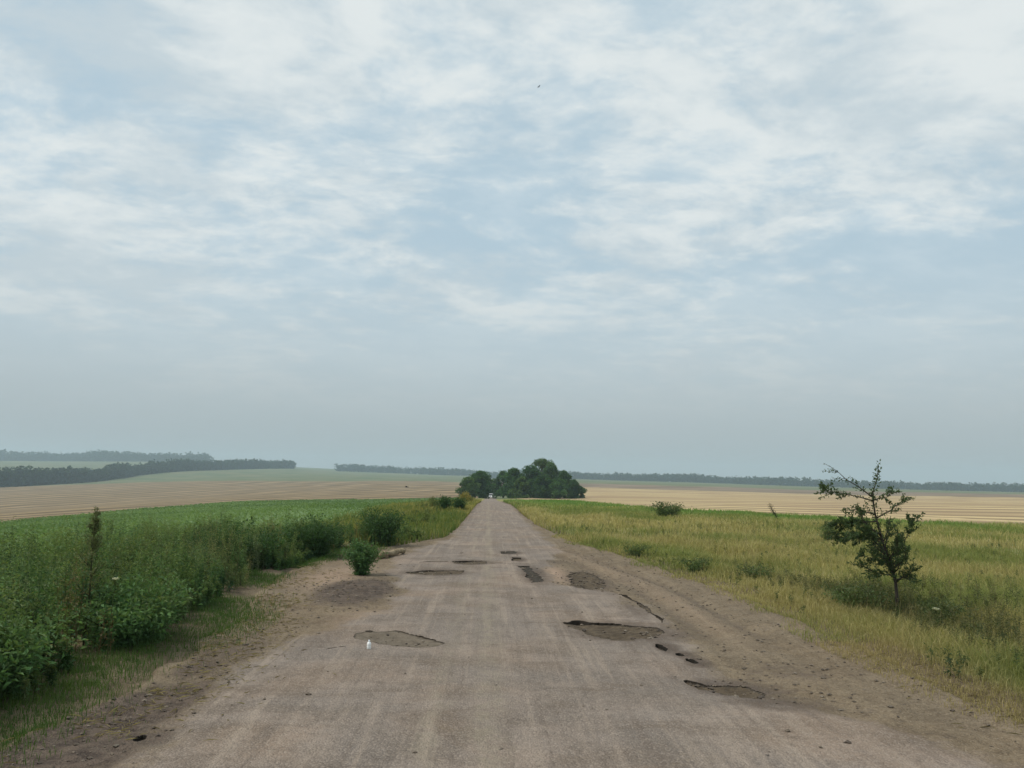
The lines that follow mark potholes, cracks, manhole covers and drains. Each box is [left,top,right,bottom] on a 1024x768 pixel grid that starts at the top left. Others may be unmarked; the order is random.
pothole [563,620,665,641]
crack [619,594,664,623]
pothole [354,631,444,648]
pothole [518,566,544,583]
pothole [566,572,606,590]
pothole [684,680,765,699]
